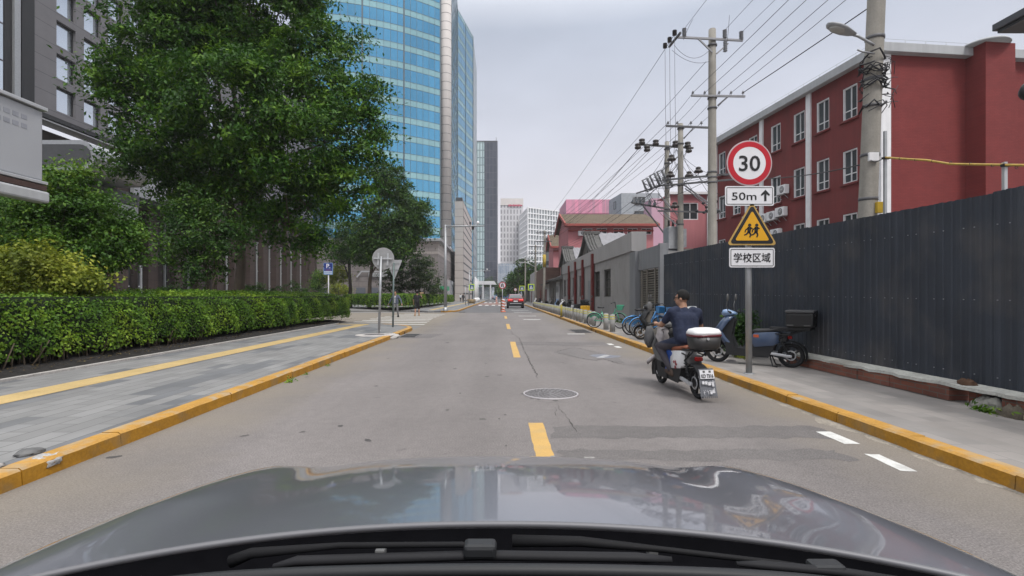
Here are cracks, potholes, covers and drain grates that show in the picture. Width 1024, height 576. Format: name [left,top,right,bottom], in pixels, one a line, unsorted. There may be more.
crack [512,332,620,375]
manhole cover [523,388,579,400]
